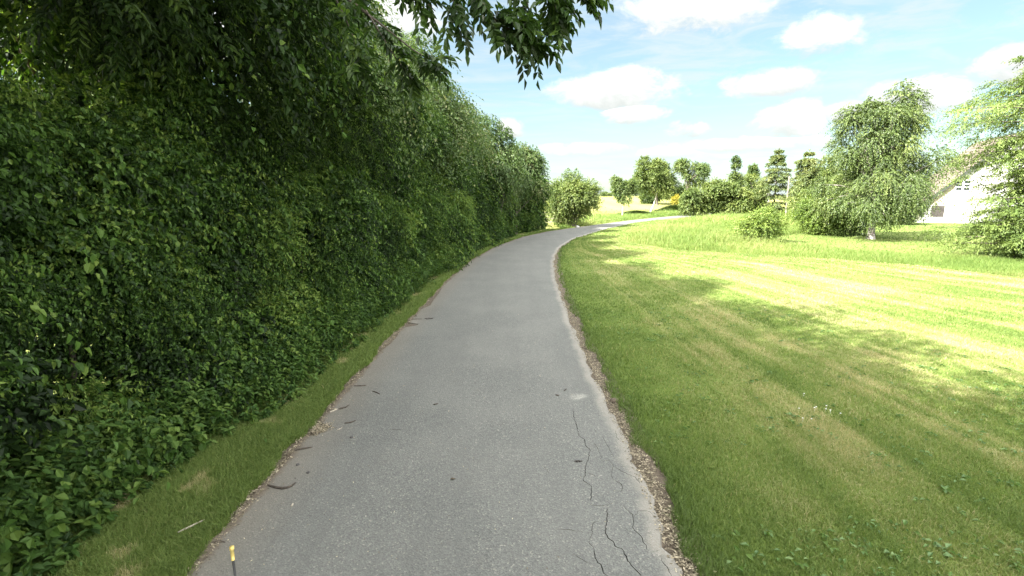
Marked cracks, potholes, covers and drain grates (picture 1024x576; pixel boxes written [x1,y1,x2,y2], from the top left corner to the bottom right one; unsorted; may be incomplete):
crack [563,412,672,576]
